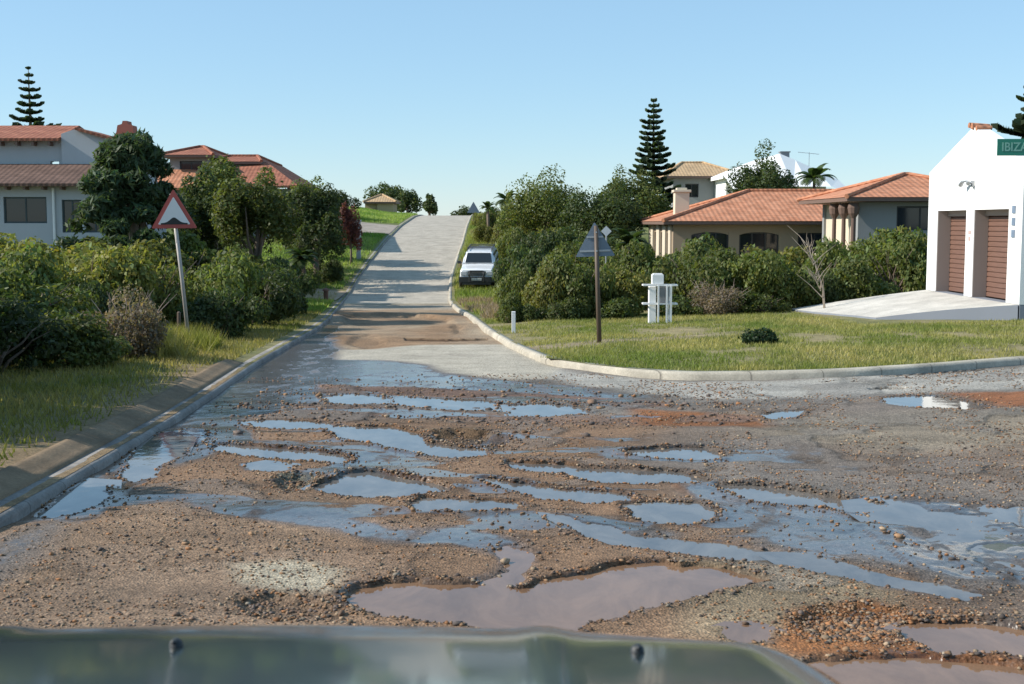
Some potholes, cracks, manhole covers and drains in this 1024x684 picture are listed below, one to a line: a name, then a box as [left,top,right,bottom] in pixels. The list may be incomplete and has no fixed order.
pothole [883,617,1024,657]
pothole [619,499,720,524]
pothole [301,467,452,498]
